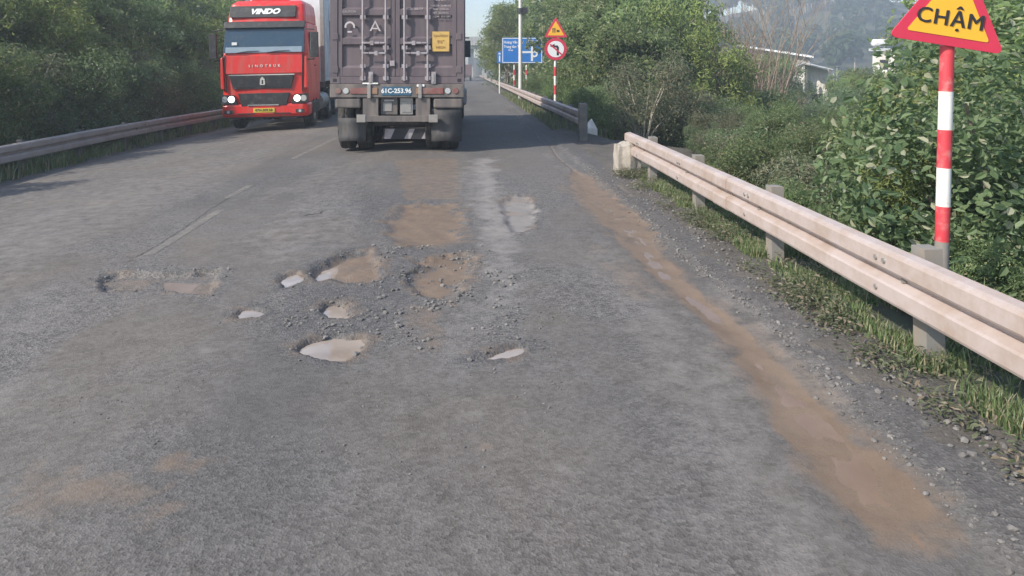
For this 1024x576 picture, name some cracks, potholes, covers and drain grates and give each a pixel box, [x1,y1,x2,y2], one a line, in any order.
pothole [287,328,382,364]
pothole [303,246,394,286]
pothole [493,194,544,234]
pothole [271,268,312,290]
pothole [90,265,231,296]
pothole [310,297,365,321]
pothole [398,251,493,302]
pothole [227,304,278,320]
